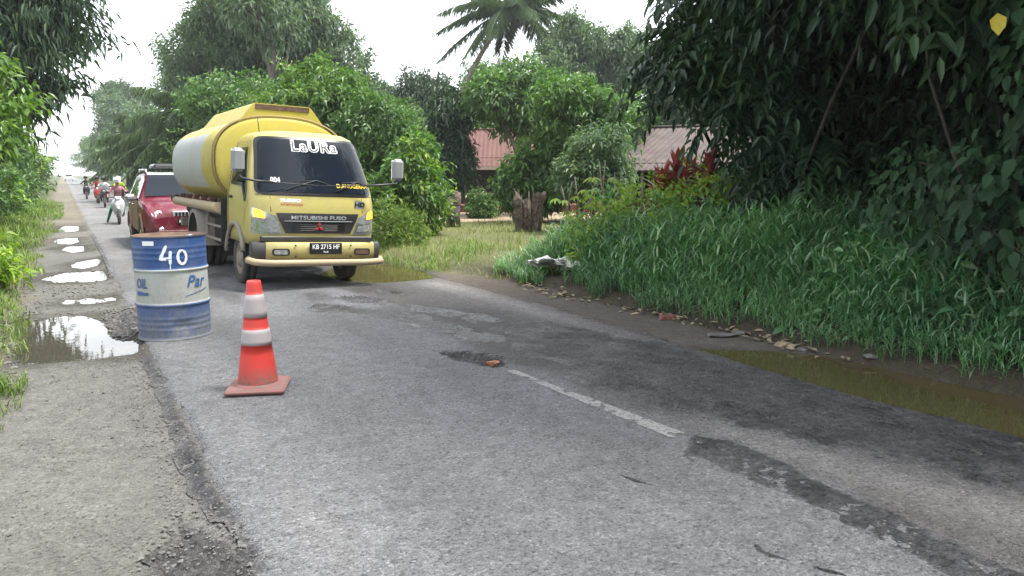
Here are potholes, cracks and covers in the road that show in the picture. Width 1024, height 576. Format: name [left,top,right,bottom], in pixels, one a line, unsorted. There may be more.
crack [754,544,790,561]
crack [618,473,651,485]
pothole [438,349,507,368]
crack [139,339,279,576]
